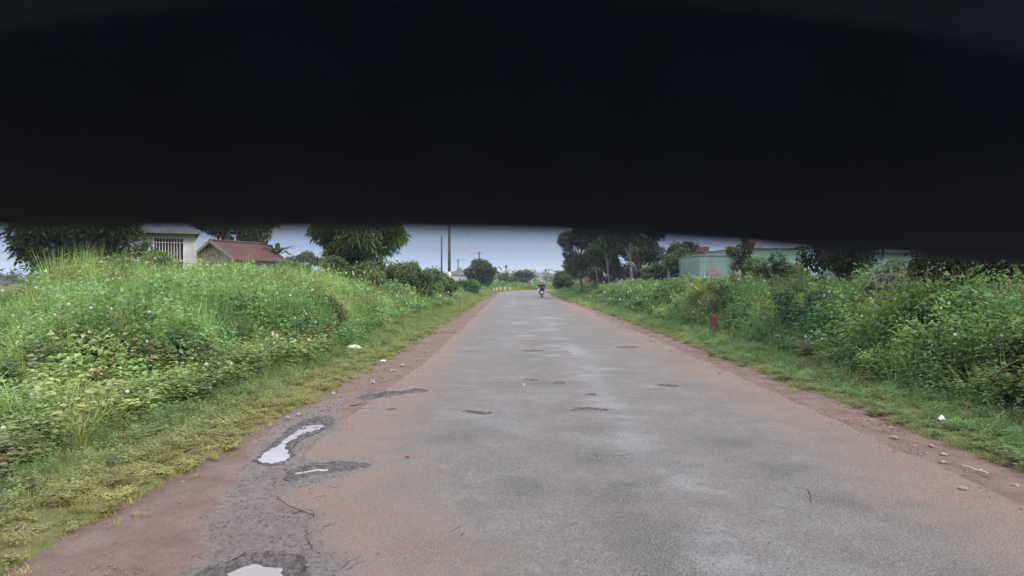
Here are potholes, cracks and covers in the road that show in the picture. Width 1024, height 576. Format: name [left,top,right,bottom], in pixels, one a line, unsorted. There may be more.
pothole [253,416,334,466]
crack [292,485,335,532]
pothole [195,550,311,576]
pothole [353,388,429,401]
pothole [283,461,370,482]
